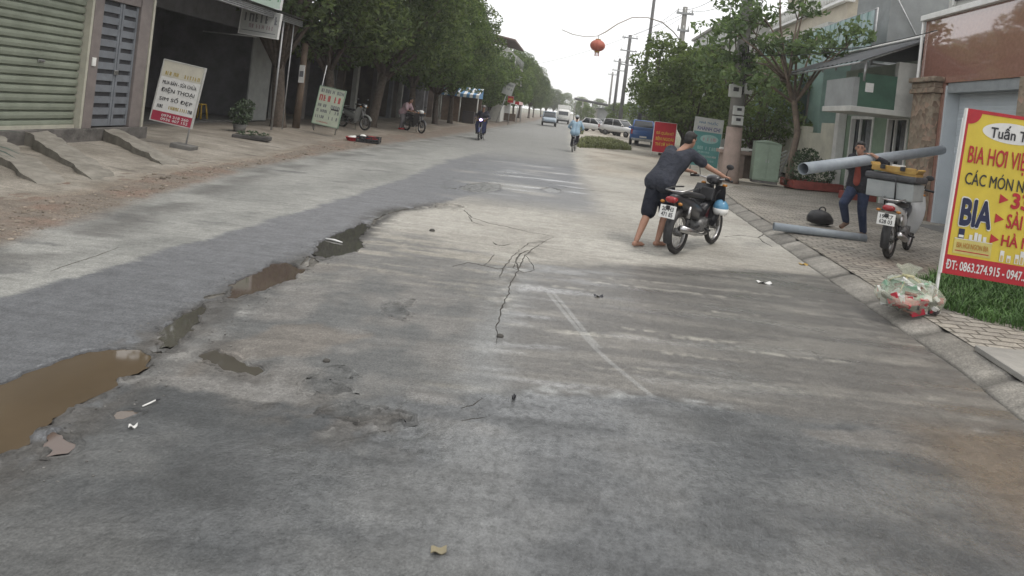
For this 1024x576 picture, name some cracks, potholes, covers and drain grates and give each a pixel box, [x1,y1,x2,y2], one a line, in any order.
pothole [191,347,269,379]
pothole [0,346,164,457]
pothole [222,260,310,300]
pothole [309,221,373,260]
pothole [149,299,211,352]
crack [455,210,554,344]
